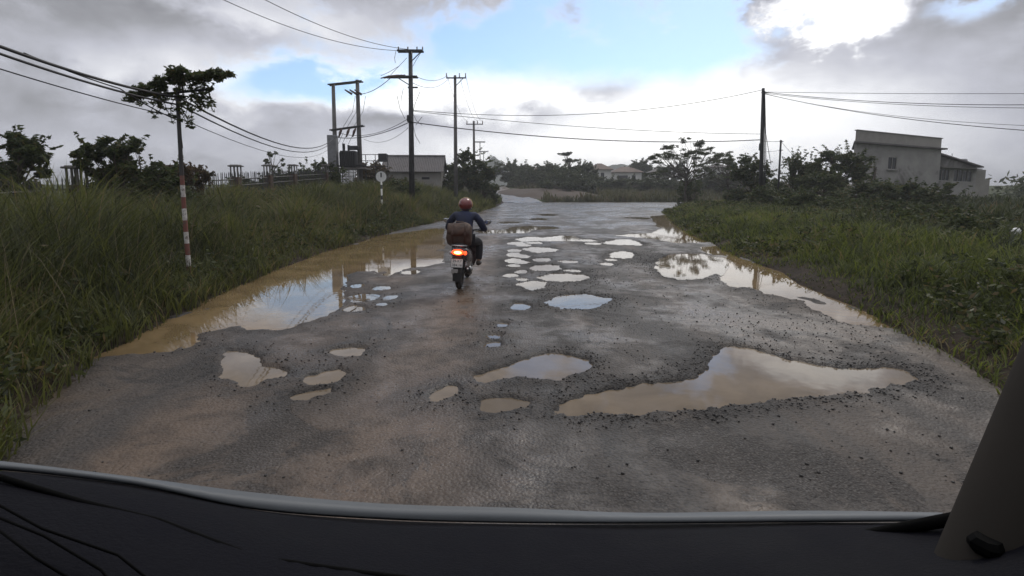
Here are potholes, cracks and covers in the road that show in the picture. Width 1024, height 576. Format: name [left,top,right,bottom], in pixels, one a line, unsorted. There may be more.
pothole [476,339,507,348]
pothole [473,391,539,414]
pothole [339,292,385,303]
pothole [345,304,370,312]
pothole [547,343,925,418]
pothole [282,383,337,401]
pothole [491,319,512,327]
pothole [470,349,597,384]
pothole [321,343,371,358]
pothole [535,272,595,282]
pothole [480,330,507,341]
pothole [422,381,466,403]
